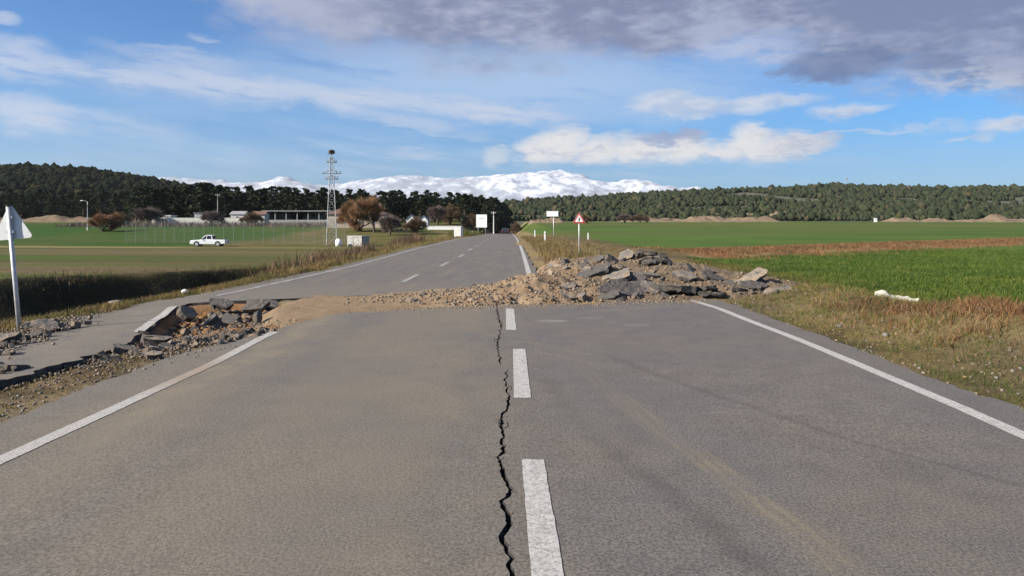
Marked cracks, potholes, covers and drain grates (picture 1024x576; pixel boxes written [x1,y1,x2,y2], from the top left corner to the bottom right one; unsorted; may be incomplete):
pothole [134,303,280,349]
crack [494,306,517,576]
